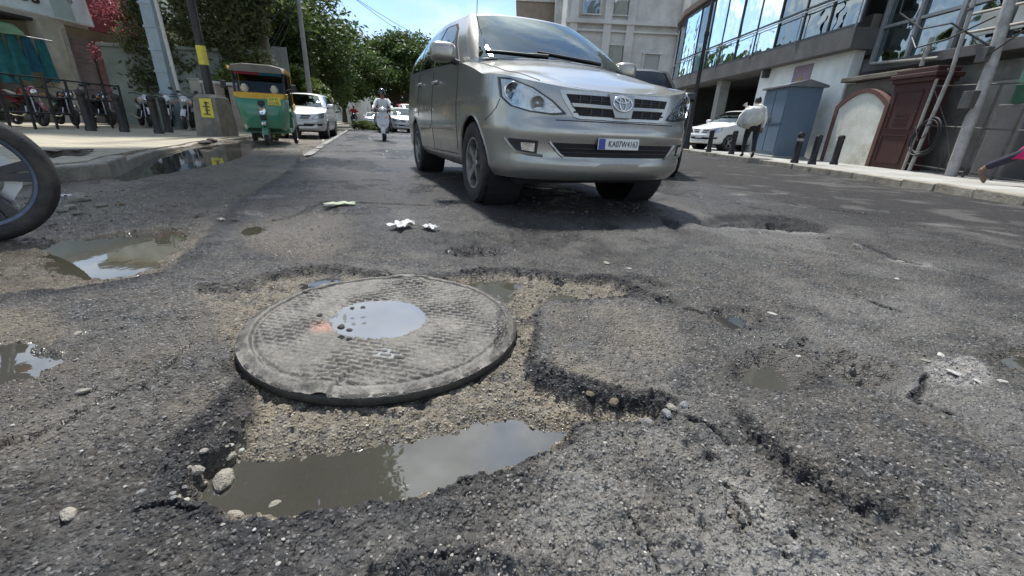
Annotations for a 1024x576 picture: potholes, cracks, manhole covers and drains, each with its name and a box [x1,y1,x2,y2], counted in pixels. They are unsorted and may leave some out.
pothole [171,267,673,522]
pothole [716,221,808,233]
pothole [728,335,833,393]
manhole cover [234,274,517,407]
pothole [438,245,507,258]
crack [687,378,957,560]
